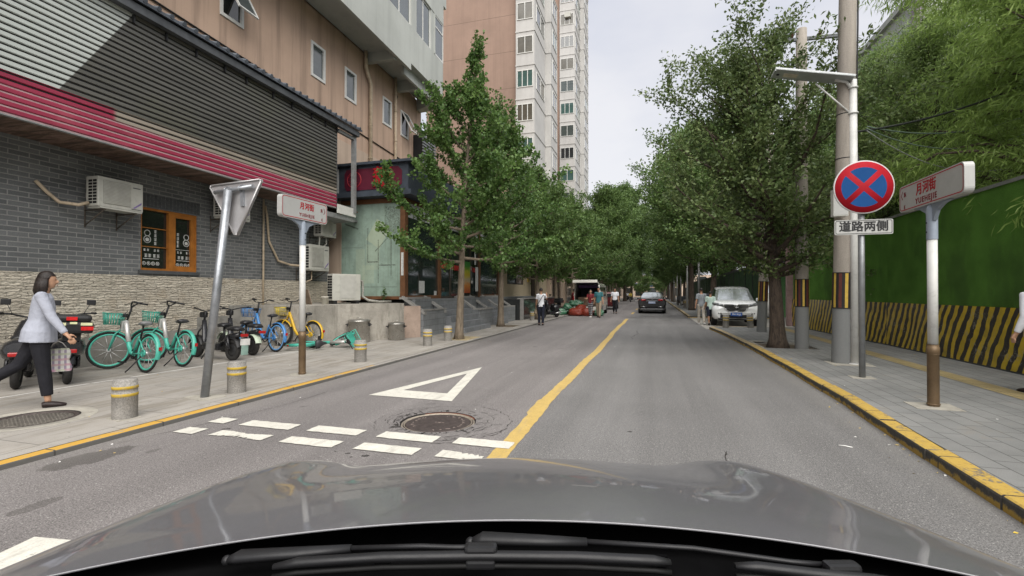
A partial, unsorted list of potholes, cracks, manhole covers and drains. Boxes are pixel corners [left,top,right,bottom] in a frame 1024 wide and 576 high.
manhole cover [0,407,98,432]
manhole cover [400,412,476,433]
